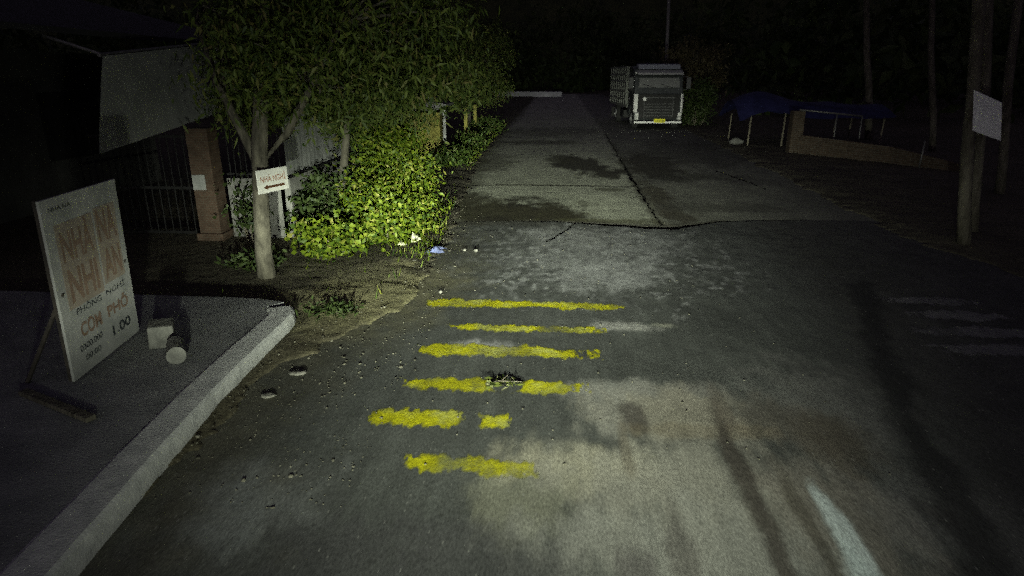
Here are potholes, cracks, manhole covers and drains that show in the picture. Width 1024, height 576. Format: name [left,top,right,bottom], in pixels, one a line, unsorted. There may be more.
crack [464,135,800,242]
